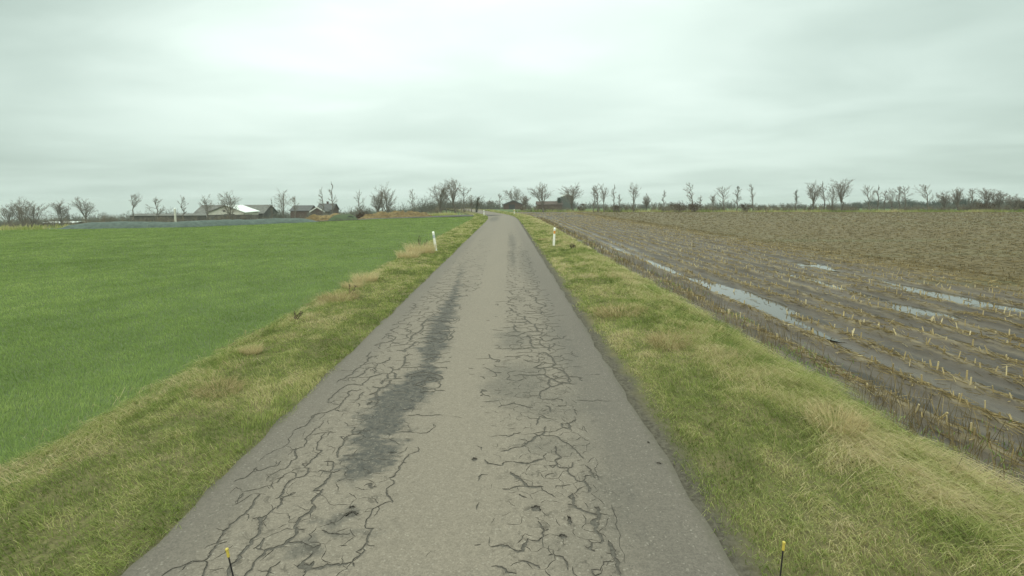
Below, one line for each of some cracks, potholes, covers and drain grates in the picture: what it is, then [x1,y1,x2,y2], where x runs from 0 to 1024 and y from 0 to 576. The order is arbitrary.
crack [477,232,625,576]
